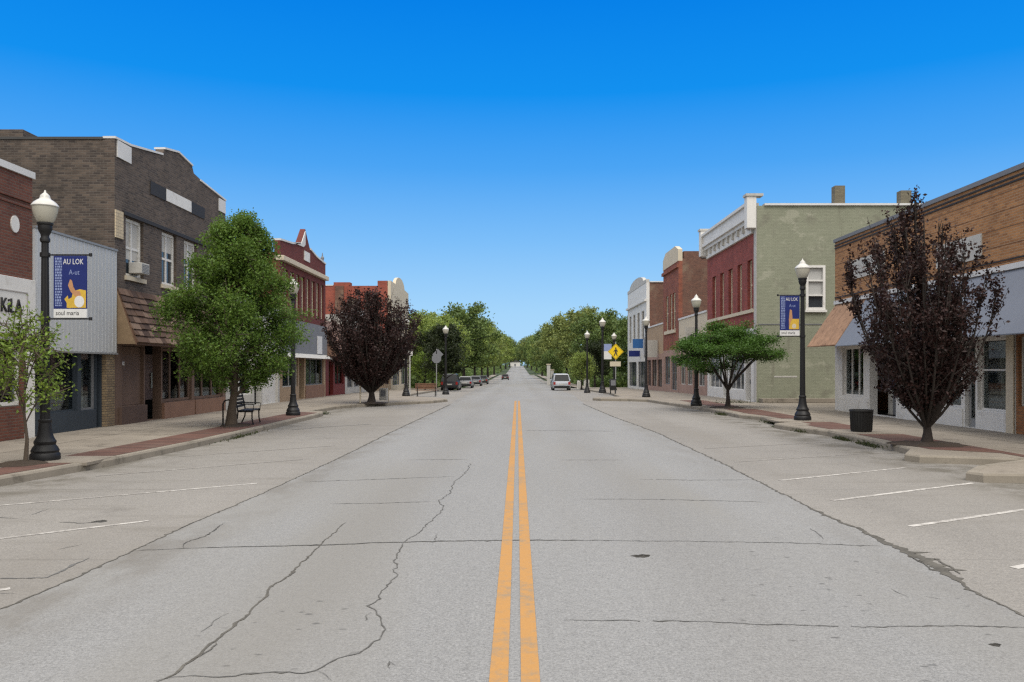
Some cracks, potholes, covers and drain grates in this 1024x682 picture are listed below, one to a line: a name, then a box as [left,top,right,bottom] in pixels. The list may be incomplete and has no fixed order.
crack [3,544,88,579]
crack [148,459,863,682]
